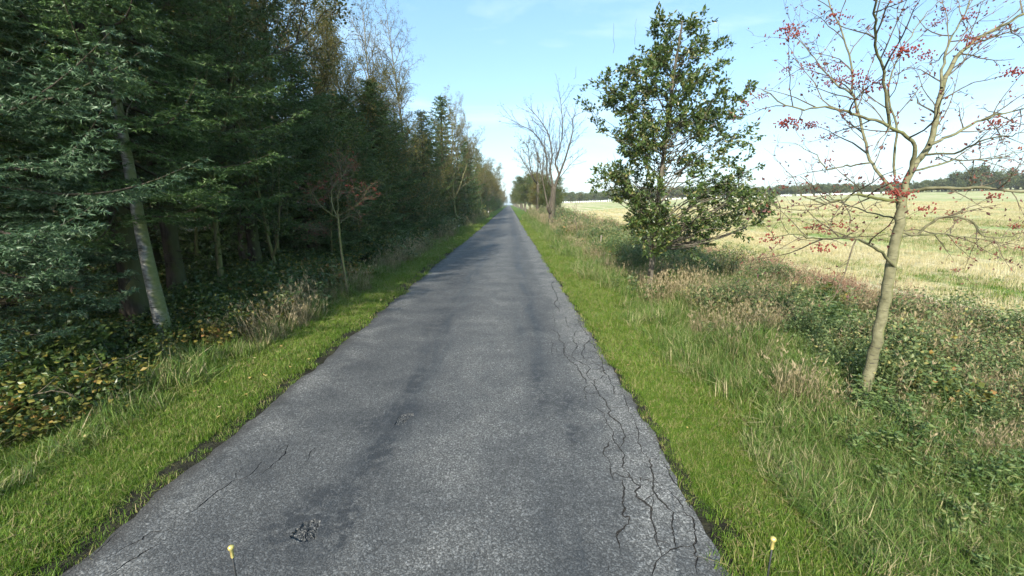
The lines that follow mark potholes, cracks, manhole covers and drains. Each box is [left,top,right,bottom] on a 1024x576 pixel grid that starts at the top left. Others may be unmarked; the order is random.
crack [70,528,171,575]
pothole [289,519,321,542]
crack [190,445,315,513]
pothole [394,413,414,425]
crack [551,282,698,575]
